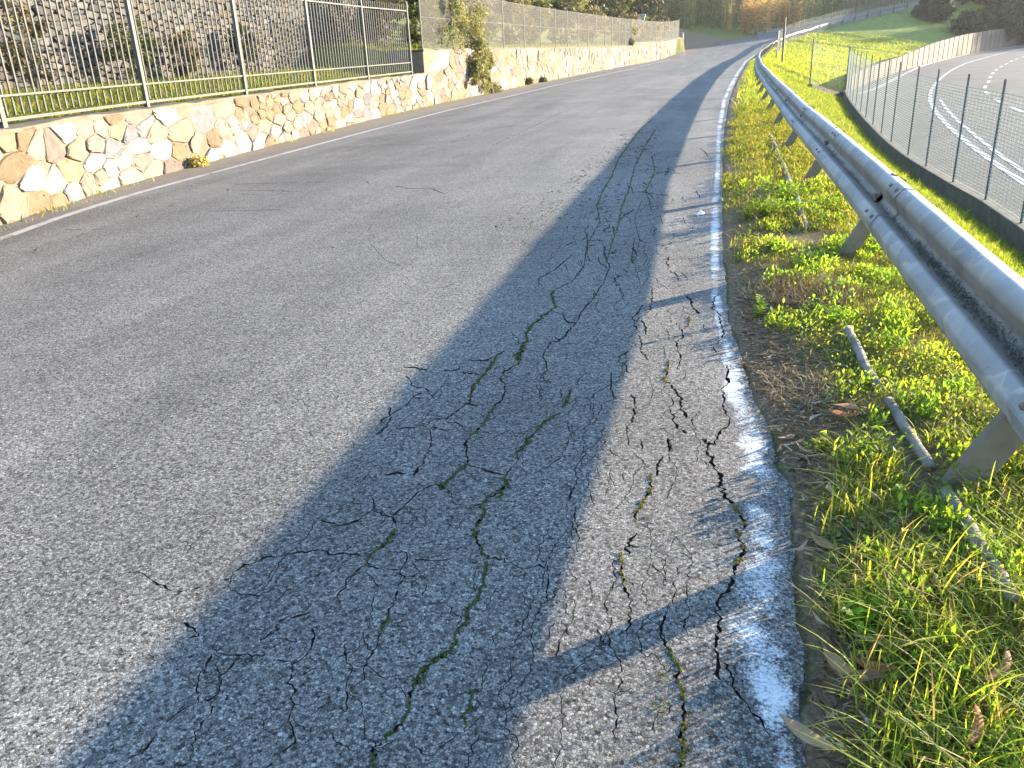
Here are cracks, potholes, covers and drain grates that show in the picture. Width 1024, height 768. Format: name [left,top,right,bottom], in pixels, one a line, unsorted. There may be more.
crack [110,99,771,768]
